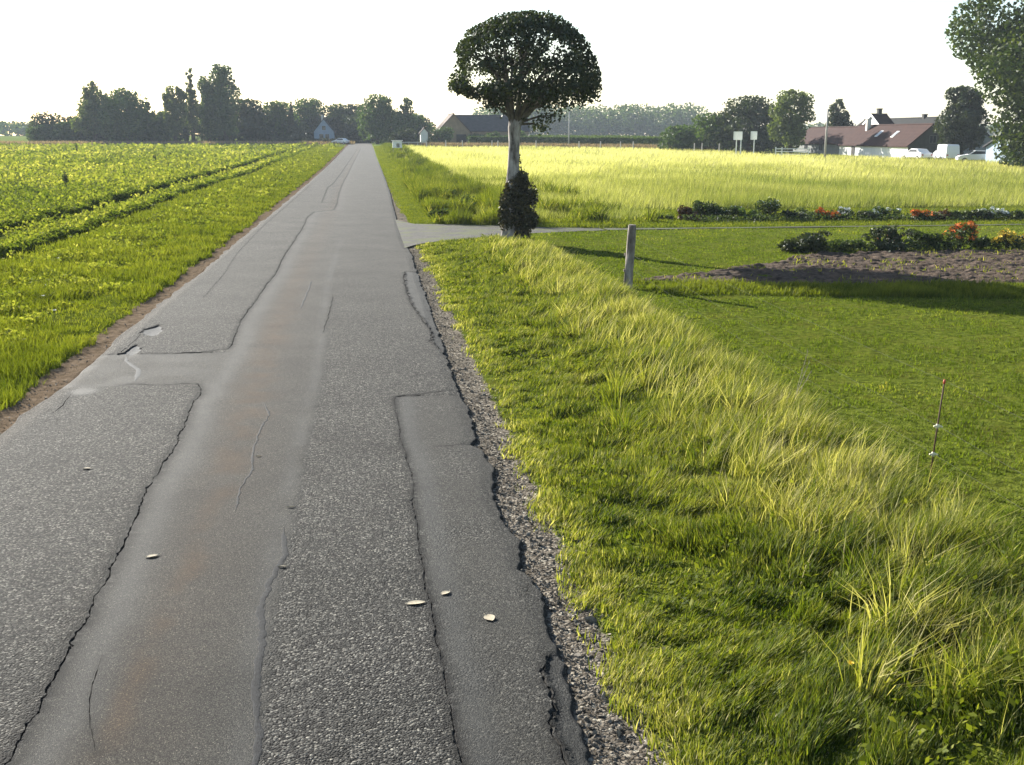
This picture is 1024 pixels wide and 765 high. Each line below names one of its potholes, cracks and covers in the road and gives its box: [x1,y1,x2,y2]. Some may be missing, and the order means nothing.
crack [531,651,575,765]
pothole [134,324,167,337]
crack [0,149,361,765]
crack [390,389,473,765]
crack [401,272,441,349]
pothole [114,344,146,356]
